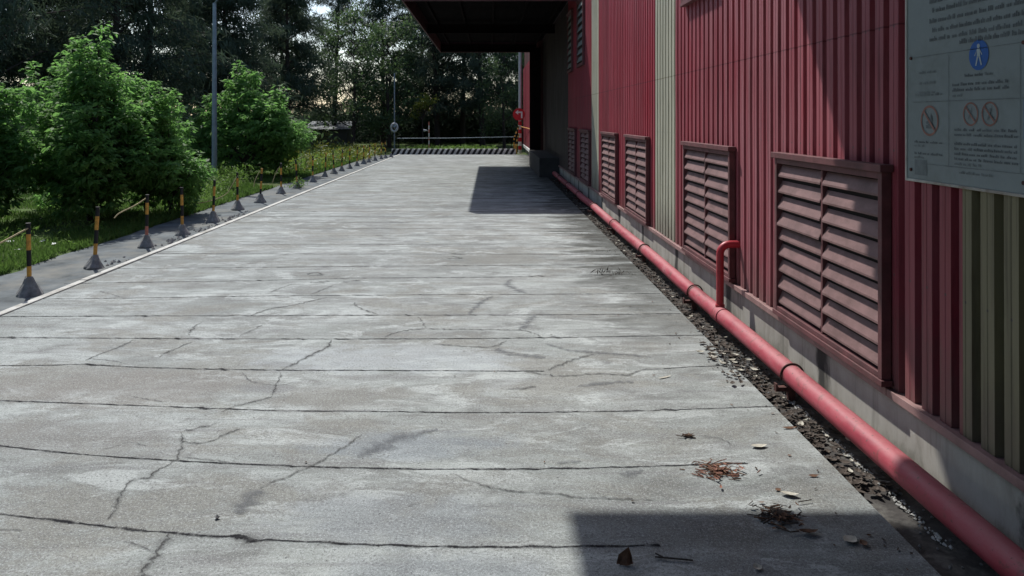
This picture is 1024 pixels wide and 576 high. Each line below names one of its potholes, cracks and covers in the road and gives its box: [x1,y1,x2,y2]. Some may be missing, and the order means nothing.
crack [520,354,662,389]
crack [261,434,362,487]
crack [125,533,171,576]
crack [108,341,331,519]
crack [463,478,632,499]
